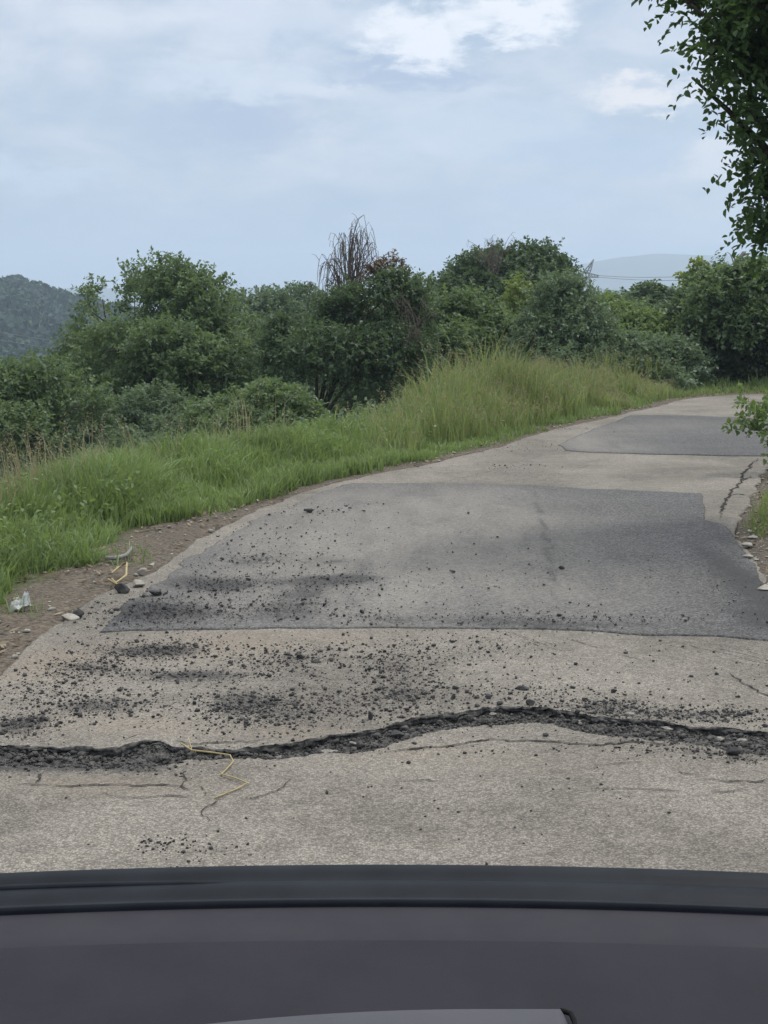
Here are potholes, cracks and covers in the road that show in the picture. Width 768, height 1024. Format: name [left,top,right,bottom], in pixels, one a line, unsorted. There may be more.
crack [719,458,759,518]
crack [382,738,696,753]
crack [19,770,291,822]
